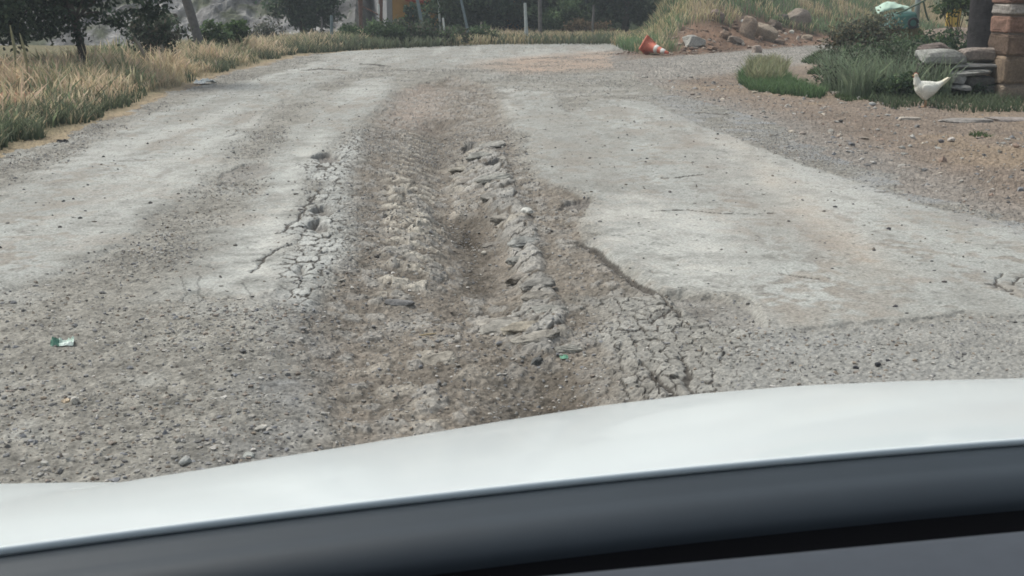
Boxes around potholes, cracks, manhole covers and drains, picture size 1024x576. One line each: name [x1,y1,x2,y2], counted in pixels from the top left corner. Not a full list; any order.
pothole [295,75,669,450]
crack [578,243,748,397]
crack [243,133,360,302]
crack [990,274,1023,292]
